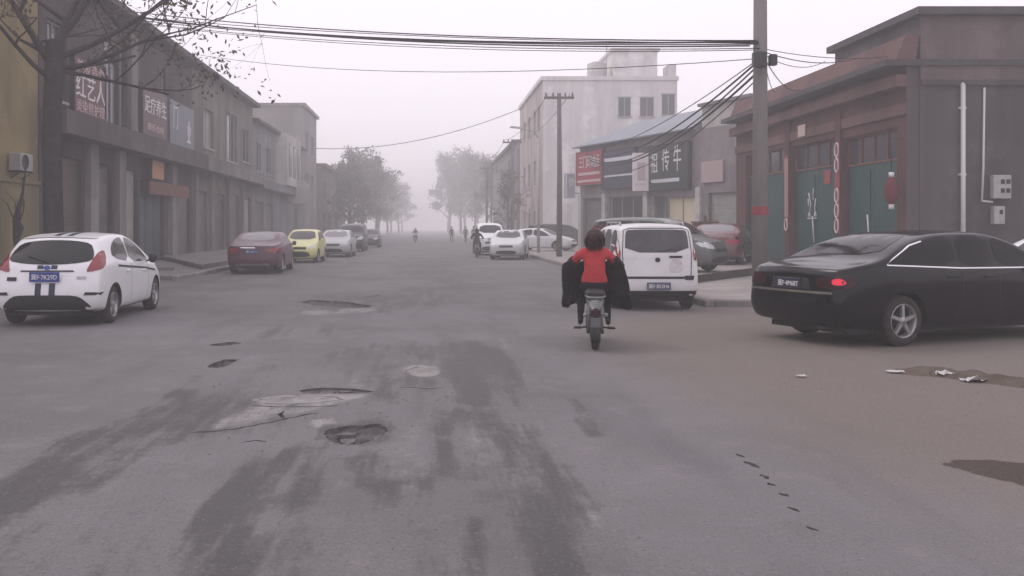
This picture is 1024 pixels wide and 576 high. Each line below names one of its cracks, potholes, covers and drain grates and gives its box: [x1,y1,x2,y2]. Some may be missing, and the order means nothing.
pothole [206,359,239,368]
pothole [302,300,373,308]
pothole [321,424,389,445]
